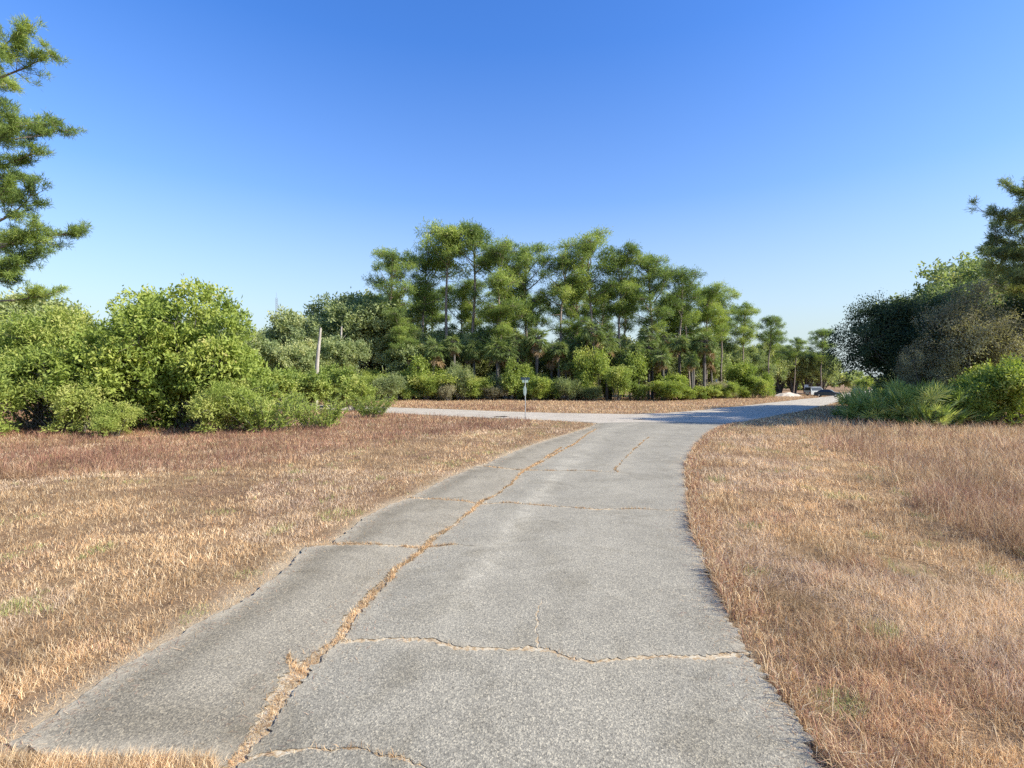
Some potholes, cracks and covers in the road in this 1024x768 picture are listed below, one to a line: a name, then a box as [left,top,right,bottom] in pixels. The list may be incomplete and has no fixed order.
crack [220,429,750,768]
